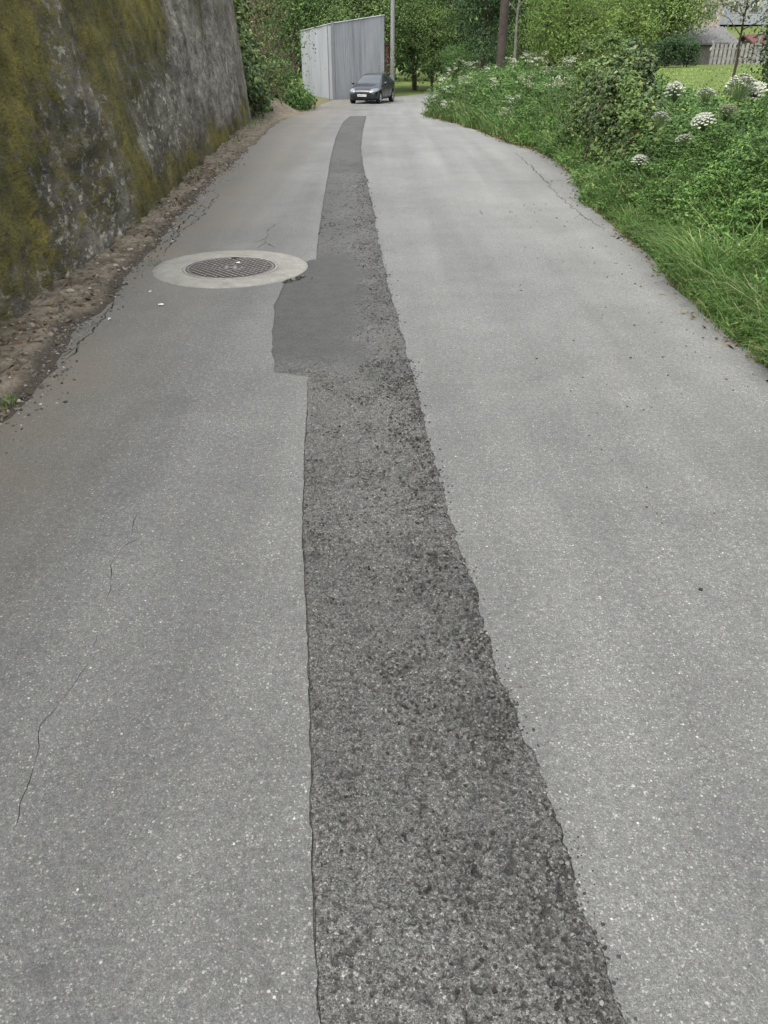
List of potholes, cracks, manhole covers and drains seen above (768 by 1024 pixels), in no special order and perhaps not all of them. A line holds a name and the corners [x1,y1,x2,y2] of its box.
crack [162,196,217,254]
manhole cover [152,250,308,289]
crack [17,515,137,822]
